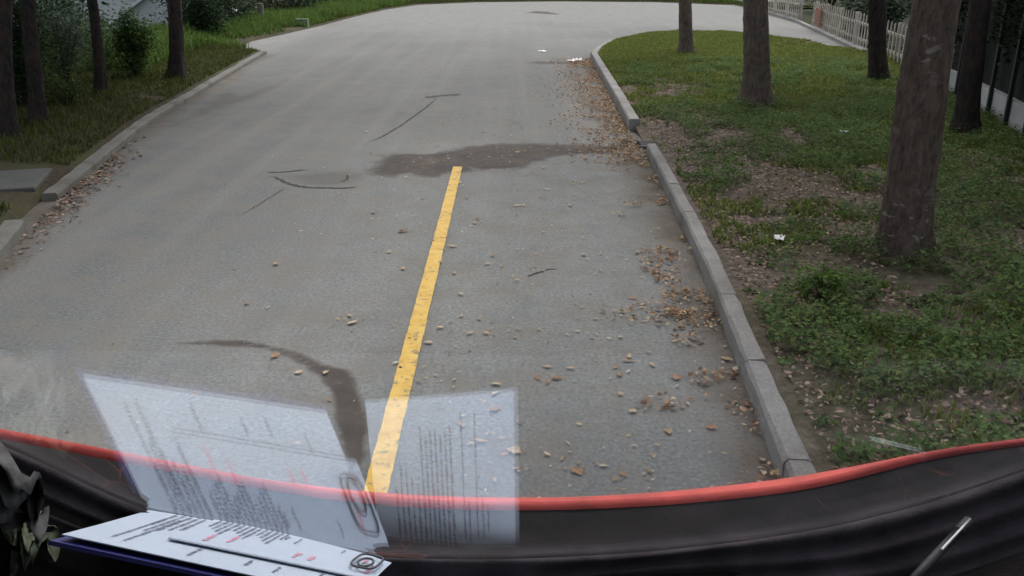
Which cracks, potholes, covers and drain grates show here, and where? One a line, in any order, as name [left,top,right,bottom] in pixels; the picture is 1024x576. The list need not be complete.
crack [241,169,356,215]
crack [372,94,460,141]
